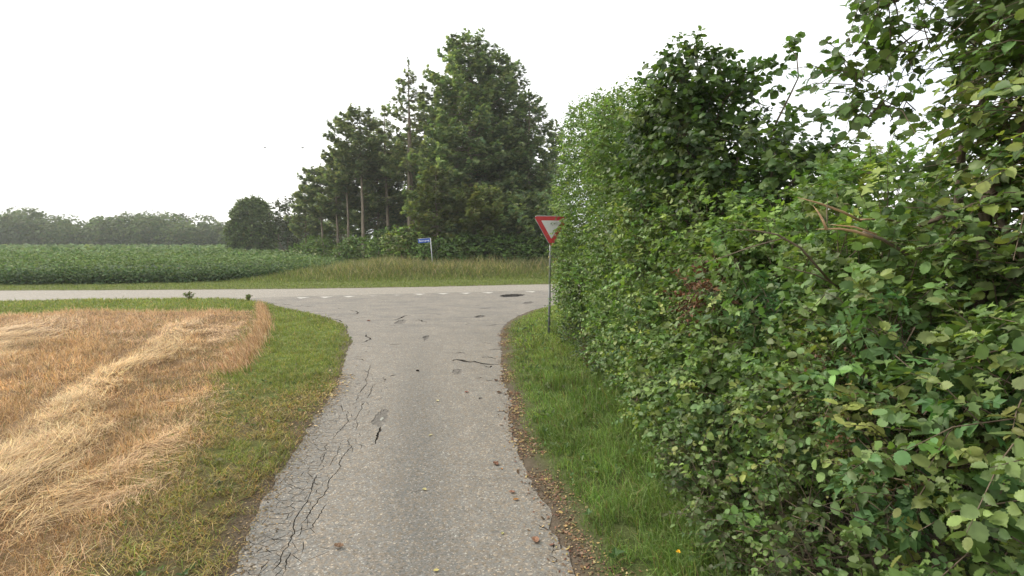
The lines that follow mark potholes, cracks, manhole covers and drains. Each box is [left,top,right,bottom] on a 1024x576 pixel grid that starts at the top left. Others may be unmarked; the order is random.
pothole [371,409,389,427]
crack [235,351,384,576]
